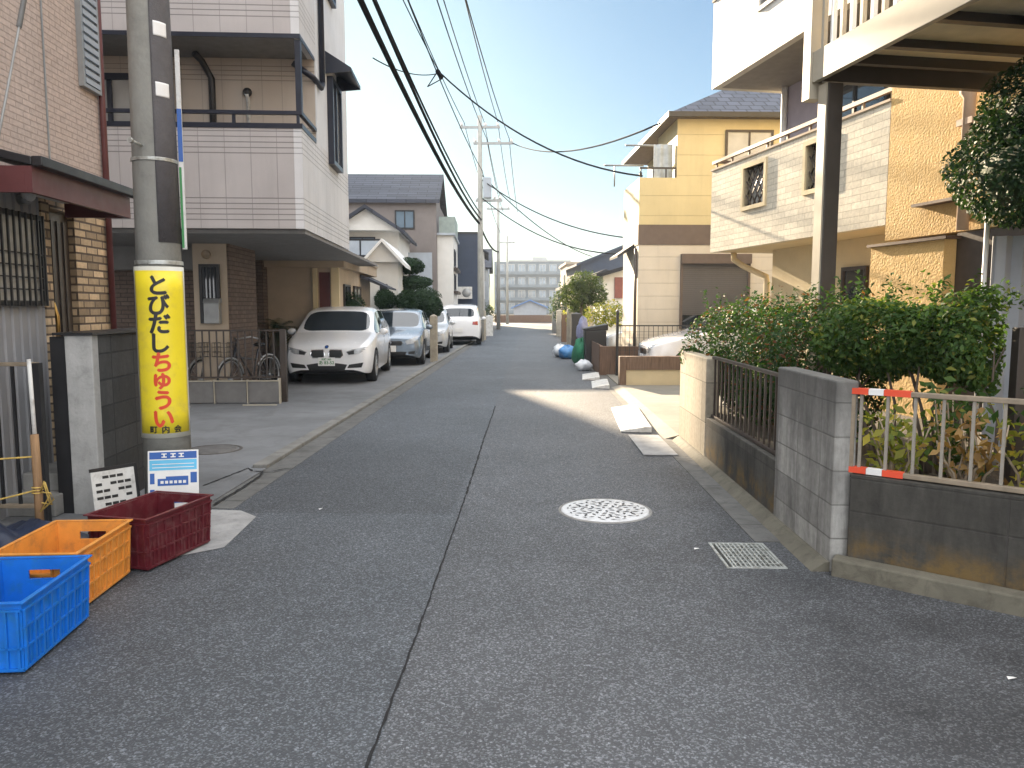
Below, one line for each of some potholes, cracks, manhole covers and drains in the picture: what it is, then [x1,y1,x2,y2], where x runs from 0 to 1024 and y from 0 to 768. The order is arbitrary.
manhole cover [558,498,652,524]
manhole cover [191,444,243,455]
drain grate [708,542,788,569]
